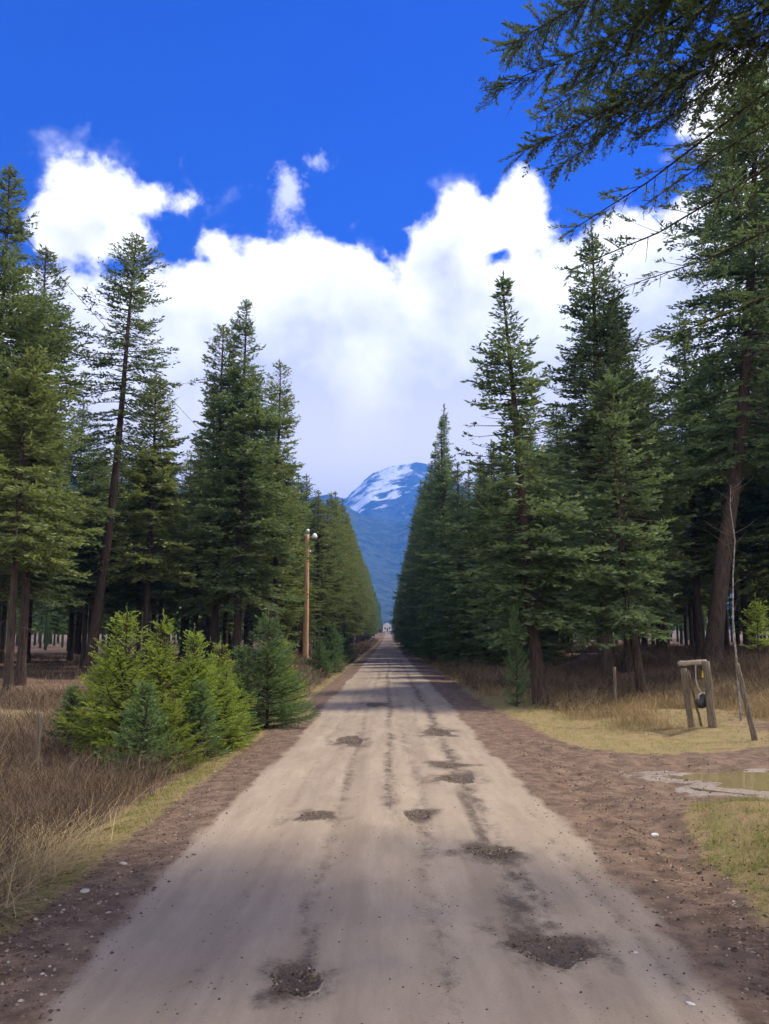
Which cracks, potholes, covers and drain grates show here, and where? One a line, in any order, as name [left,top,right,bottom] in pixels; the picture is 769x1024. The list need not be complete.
pothole [432,761,469,769]
pothole [291,810,338,822]
pothole [335,735,365,746]
pothole [496,930,602,972]
pothole [423,727,452,736]
pothole [270,962,326,999]
pothole [403,808,434,822]
pothole [434,773,477,784]
pothole [460,844,519,861]
